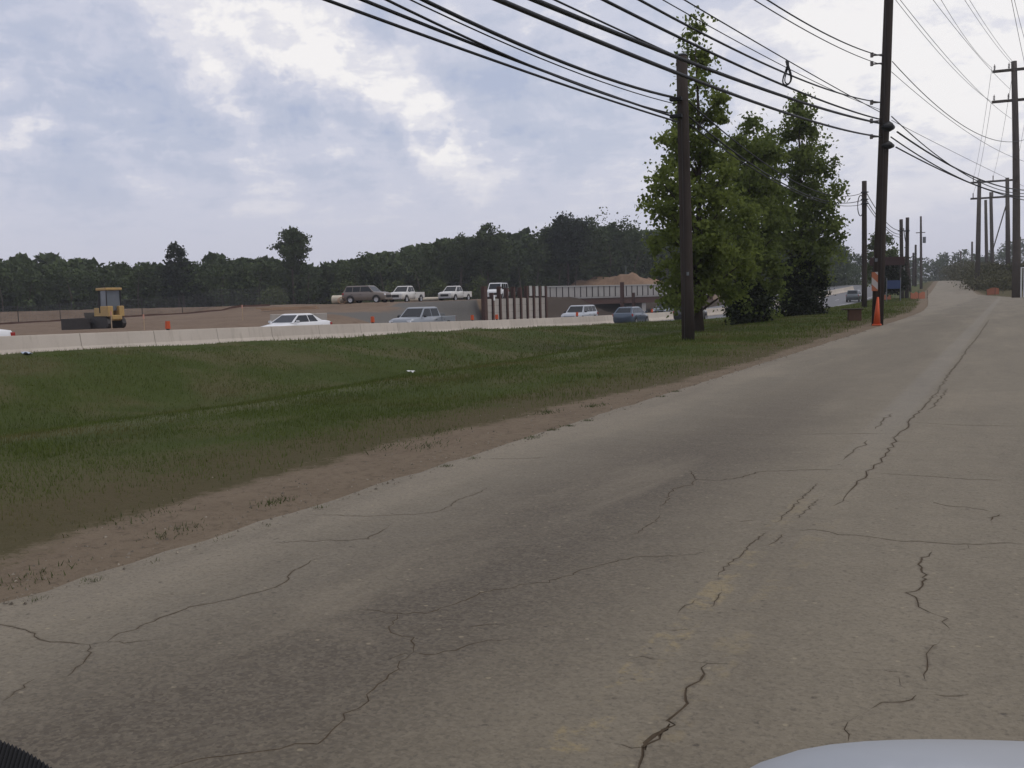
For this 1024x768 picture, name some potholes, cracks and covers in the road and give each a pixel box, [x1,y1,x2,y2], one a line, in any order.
crack [630,327,996,628]
crack [172,554,694,768]
crack [623,629,716,768]
crack [0,558,319,676]
crack [876,645,962,706]
